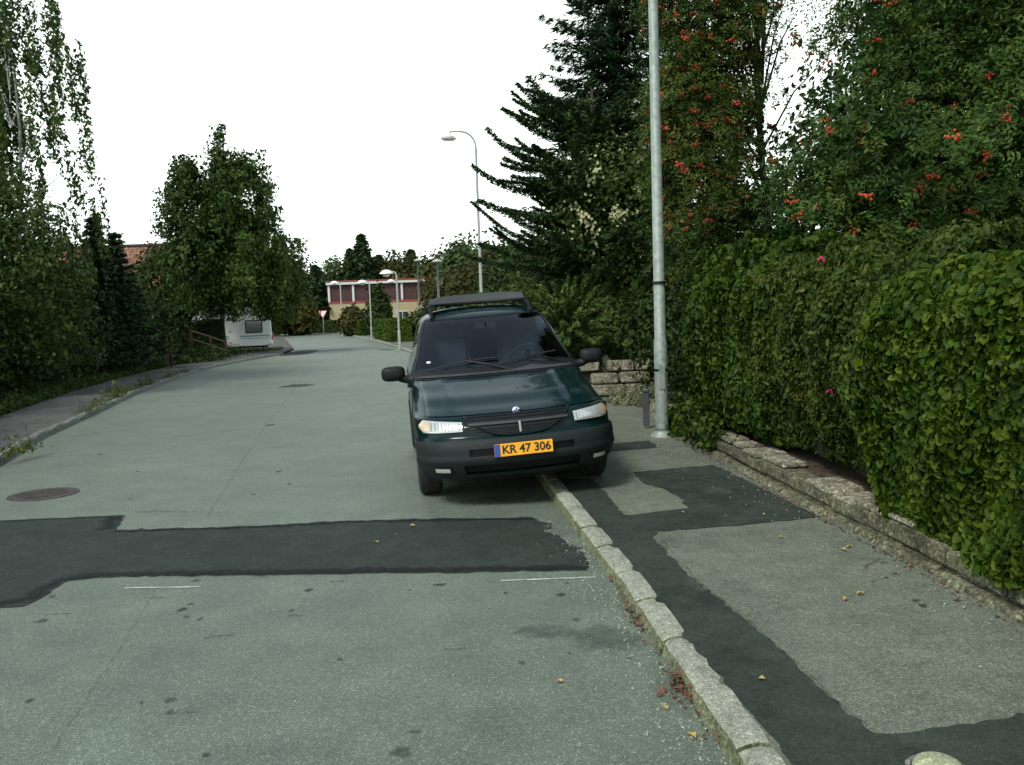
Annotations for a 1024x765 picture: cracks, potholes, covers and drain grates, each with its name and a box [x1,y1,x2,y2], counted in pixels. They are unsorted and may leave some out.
manhole cover [6,487,80,502]
